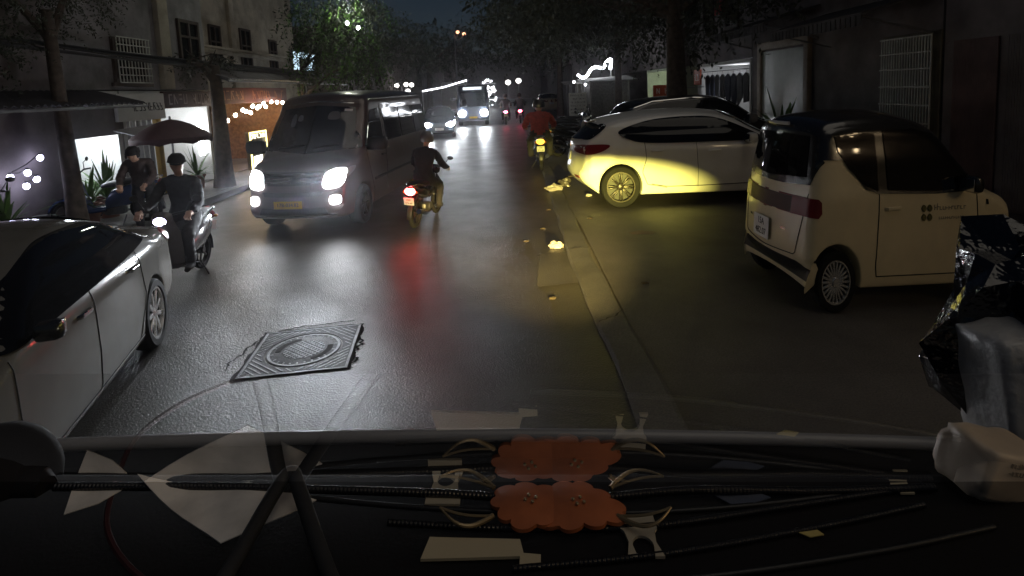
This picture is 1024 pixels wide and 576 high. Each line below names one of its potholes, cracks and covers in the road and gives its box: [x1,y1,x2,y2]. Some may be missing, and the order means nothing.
manhole cover [235,324,361,379]
